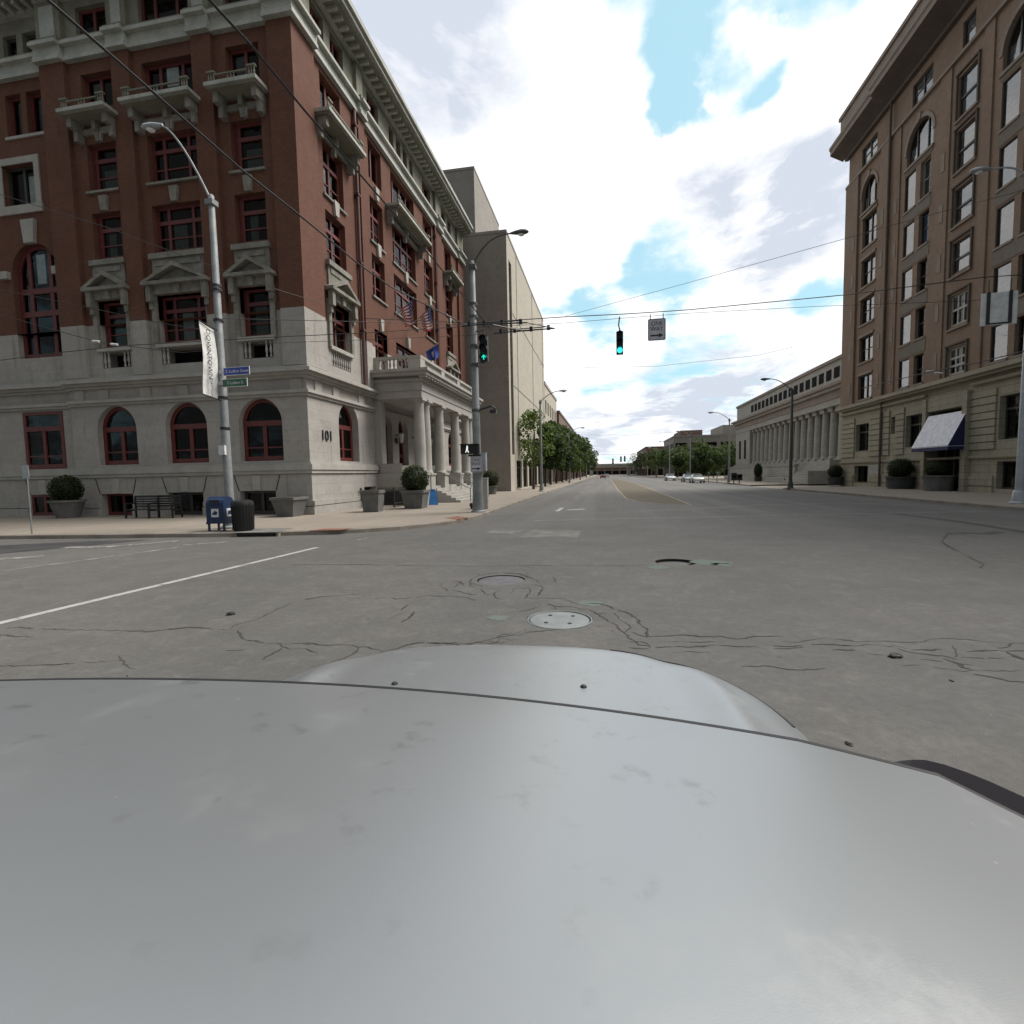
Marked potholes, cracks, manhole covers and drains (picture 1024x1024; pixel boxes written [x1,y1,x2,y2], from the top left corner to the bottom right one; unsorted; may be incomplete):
manhole cover [477,575,525,585]
crack [0,567,1024,682]
manhole cover [527,610,593,629]
crack [941,533,985,568]
